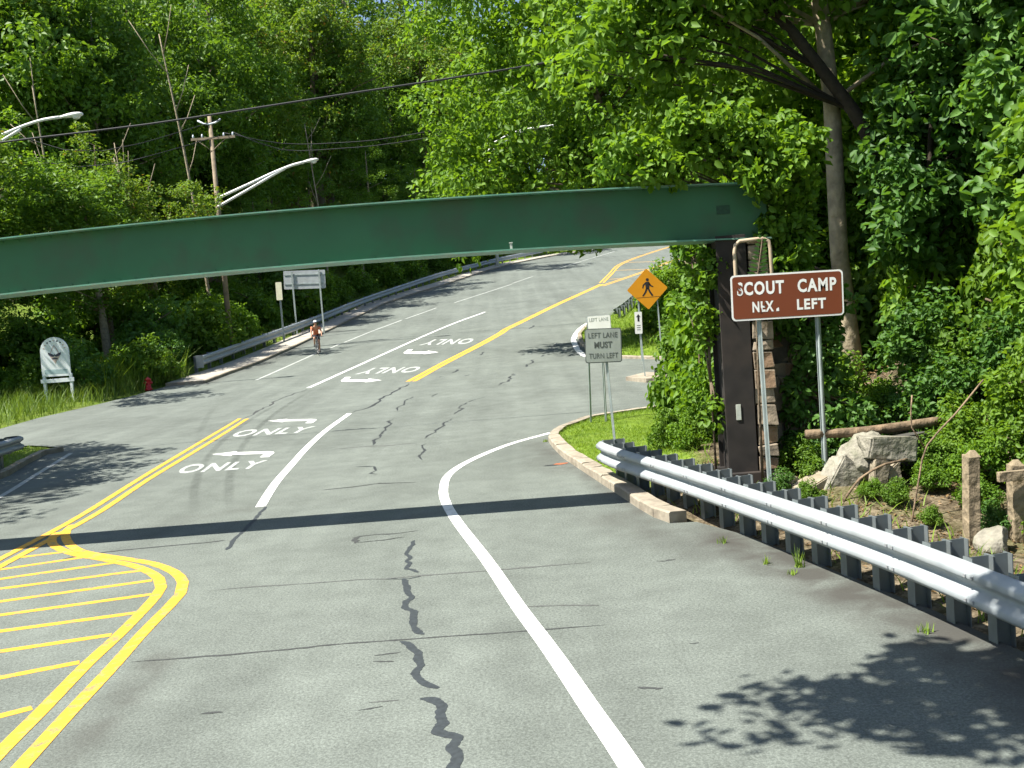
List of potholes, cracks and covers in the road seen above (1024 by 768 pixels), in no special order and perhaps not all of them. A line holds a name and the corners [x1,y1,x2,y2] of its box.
crack [352,530,418,543]
crack [335,343,557,460]
